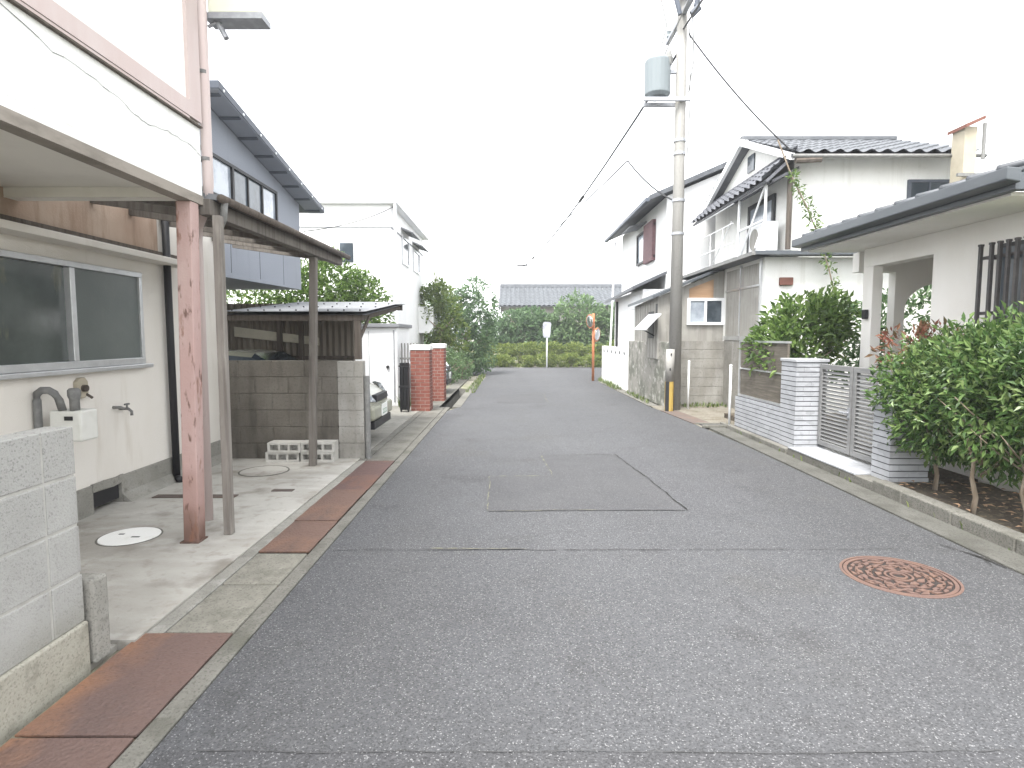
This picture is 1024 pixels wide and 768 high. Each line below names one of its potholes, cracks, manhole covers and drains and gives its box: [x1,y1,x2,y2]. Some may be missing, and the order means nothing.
manhole cover [839,556,964,599]
